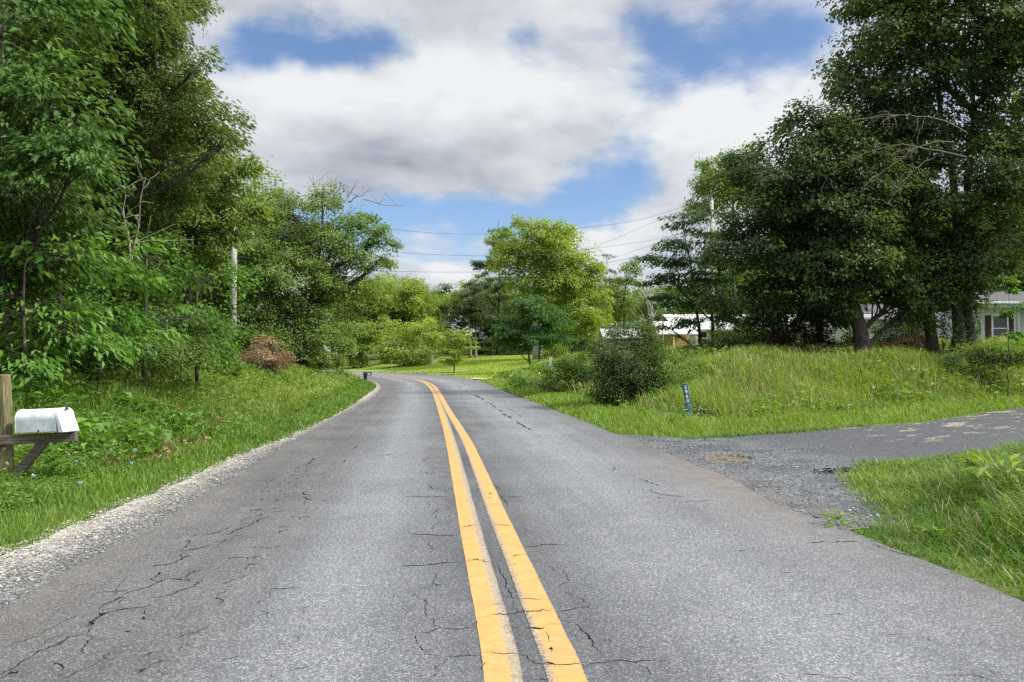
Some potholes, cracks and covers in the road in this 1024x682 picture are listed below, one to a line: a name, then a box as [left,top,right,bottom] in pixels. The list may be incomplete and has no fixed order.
crack [0,446,357,682]
crack [401,457,666,681]
pothole [811,467,851,475]
crack [810,541,916,558]
